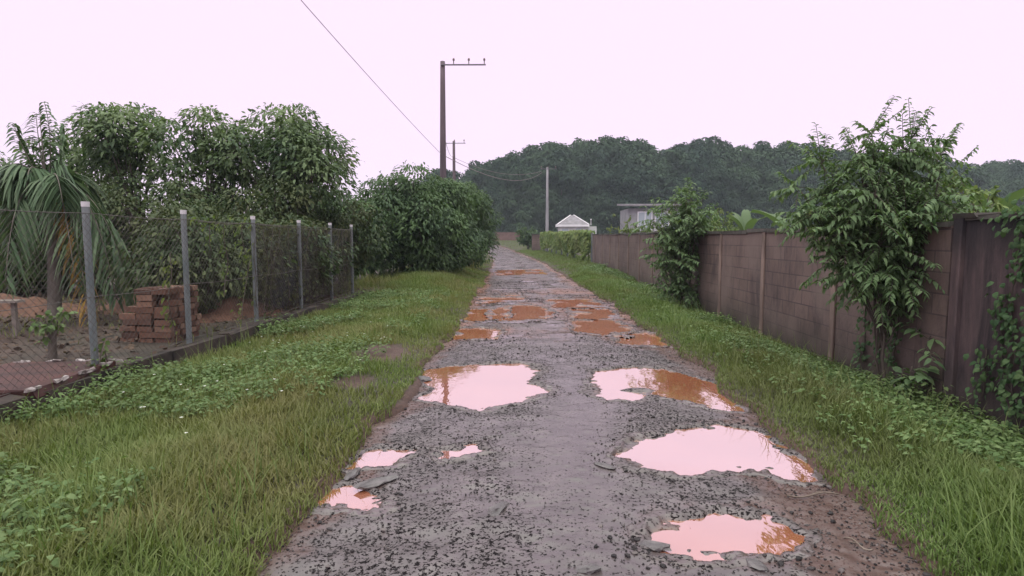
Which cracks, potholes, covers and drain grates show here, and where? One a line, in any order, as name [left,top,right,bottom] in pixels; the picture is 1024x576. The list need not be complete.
pothole [577,364,751,414]
pothole [566,319,637,339]
pothole [606,331,673,348]
pothole [606,420,829,487]
pothole [428,439,497,464]
pothole [459,306,516,322]
pothole [413,360,559,413]
pothole [562,307,625,320]
pothole [484,304,561,324]
pothole [341,443,430,474]
pothole [626,501,823,569]
pothole [538,297,610,309]
